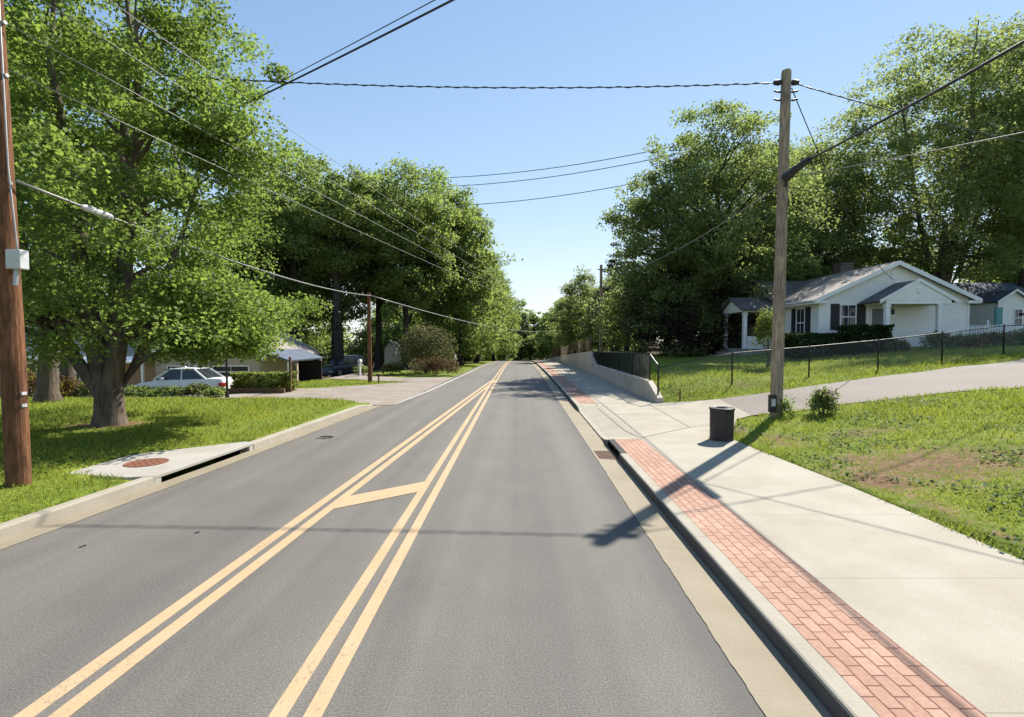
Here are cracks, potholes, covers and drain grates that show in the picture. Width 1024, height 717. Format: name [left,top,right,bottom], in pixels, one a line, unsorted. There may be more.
drain grate [594,440,626,460]
manhole cover [123,458,169,467]
drain grate [71,441,254,485]
